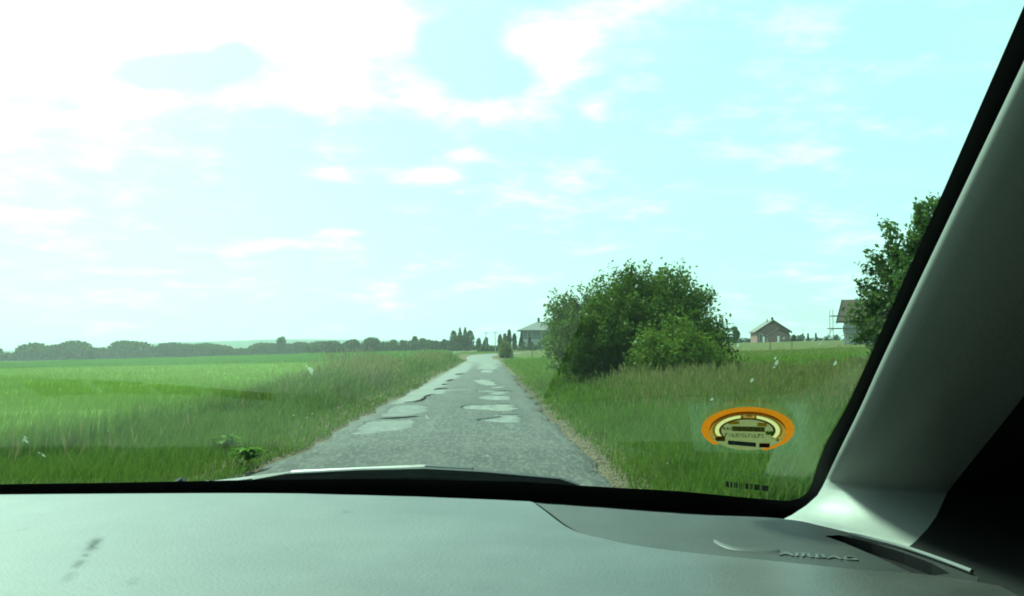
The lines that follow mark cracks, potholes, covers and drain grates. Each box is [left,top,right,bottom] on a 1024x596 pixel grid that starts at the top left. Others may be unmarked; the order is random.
crack [379,373,463,419]
